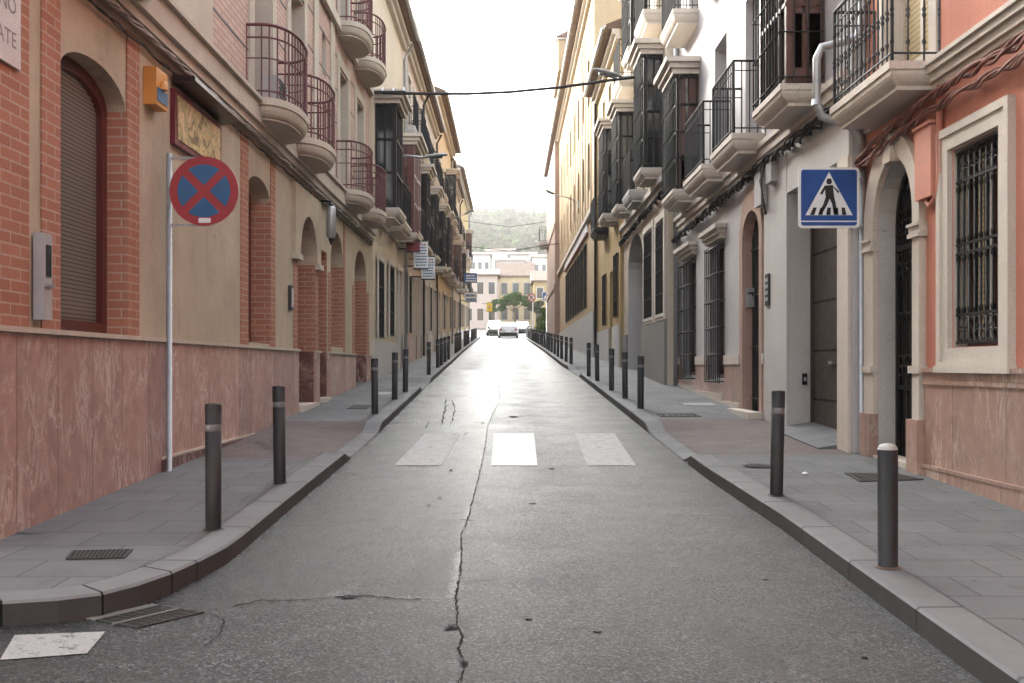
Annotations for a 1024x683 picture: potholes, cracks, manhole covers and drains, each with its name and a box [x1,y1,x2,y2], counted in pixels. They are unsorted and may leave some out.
drain grate [66,549,133,560]
drain grate [96,605,204,629]
crack [201,366,532,683]
